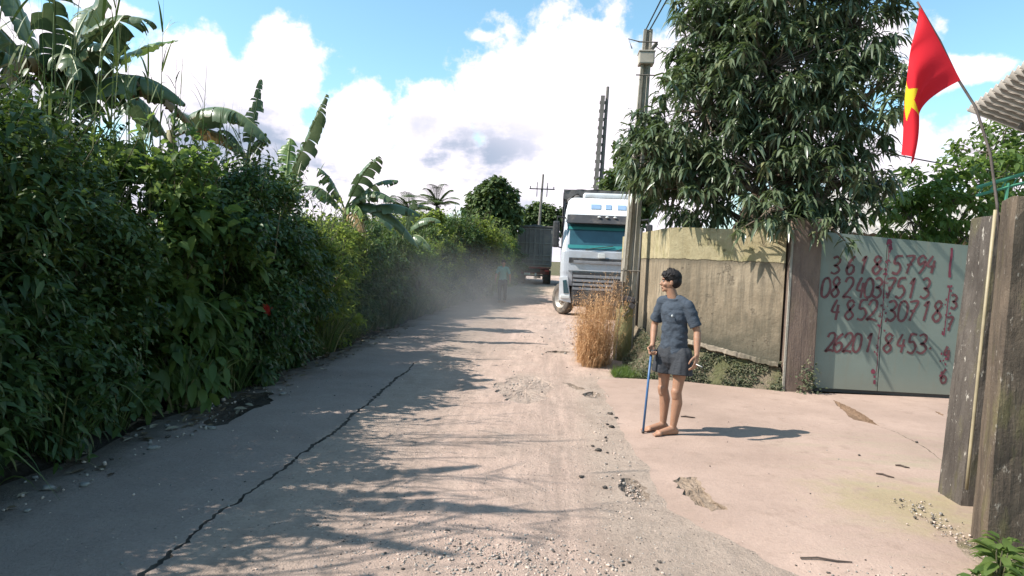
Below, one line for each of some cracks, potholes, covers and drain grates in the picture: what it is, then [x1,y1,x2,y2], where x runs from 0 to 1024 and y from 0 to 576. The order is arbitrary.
pothole [673,477,728,512]
pothole [618,478,650,502]
pothole [834,400,879,426]
pothole [203,392,274,426]
pothole [493,376,555,404]
crack [137,361,419,576]
